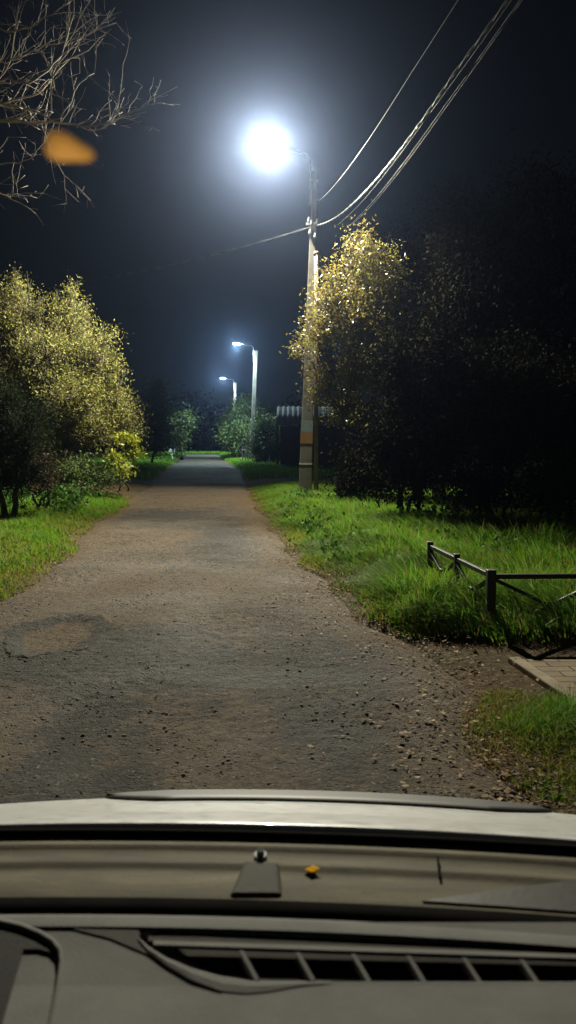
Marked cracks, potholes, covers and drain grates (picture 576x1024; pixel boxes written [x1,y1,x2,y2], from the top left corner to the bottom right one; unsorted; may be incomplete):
pothole [3,613,111,659]
